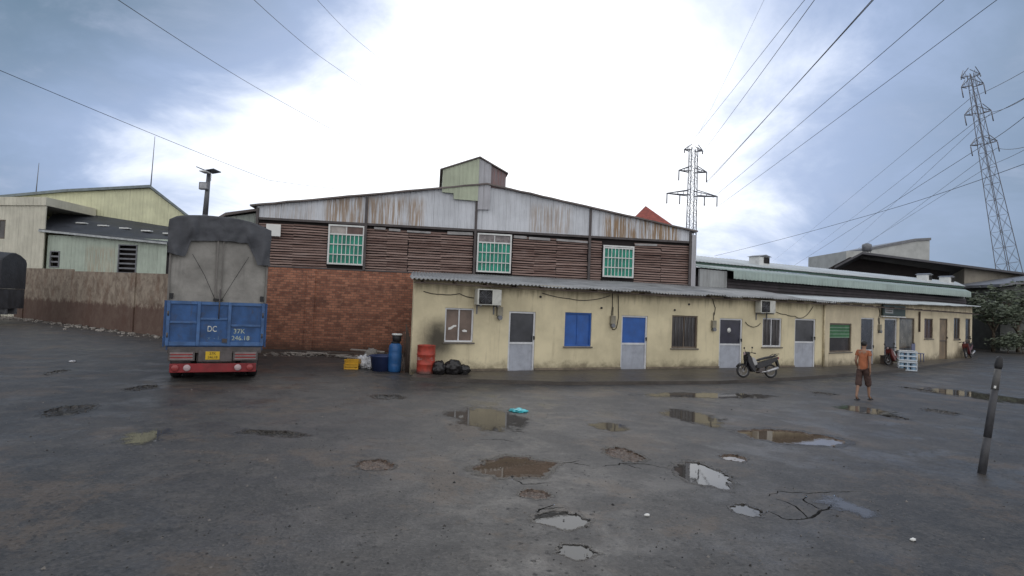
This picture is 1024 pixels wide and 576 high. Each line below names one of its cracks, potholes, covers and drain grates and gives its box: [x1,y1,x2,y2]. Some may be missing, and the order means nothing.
pothole [528,509,595,531]
pothole [465,454,565,480]
crack [768,491,857,520]
pothole [667,459,738,493]
pothole [554,542,604,561]
pothole [727,503,765,518]
pothole [352,458,397,471]
pothole [517,488,555,500]
pothole [601,446,651,464]
pothole [235,429,311,438]
pothole [728,428,856,448]
pothole [36,404,101,418]
